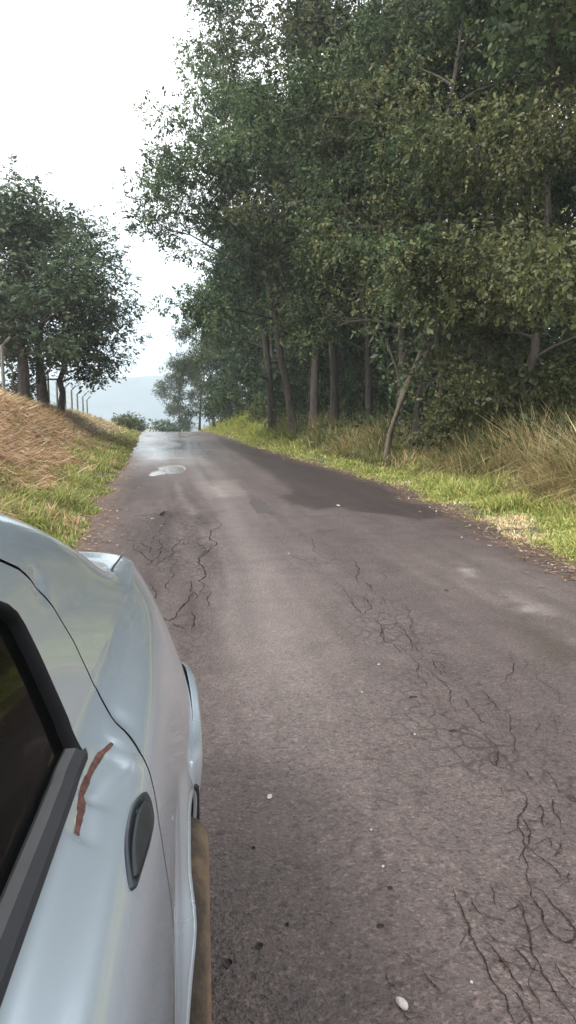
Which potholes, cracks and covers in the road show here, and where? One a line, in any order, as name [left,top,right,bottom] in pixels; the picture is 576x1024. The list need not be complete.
crack [133,511,219,629]
crack [345,559,576,1024]
pothole [158,465,186,474]
